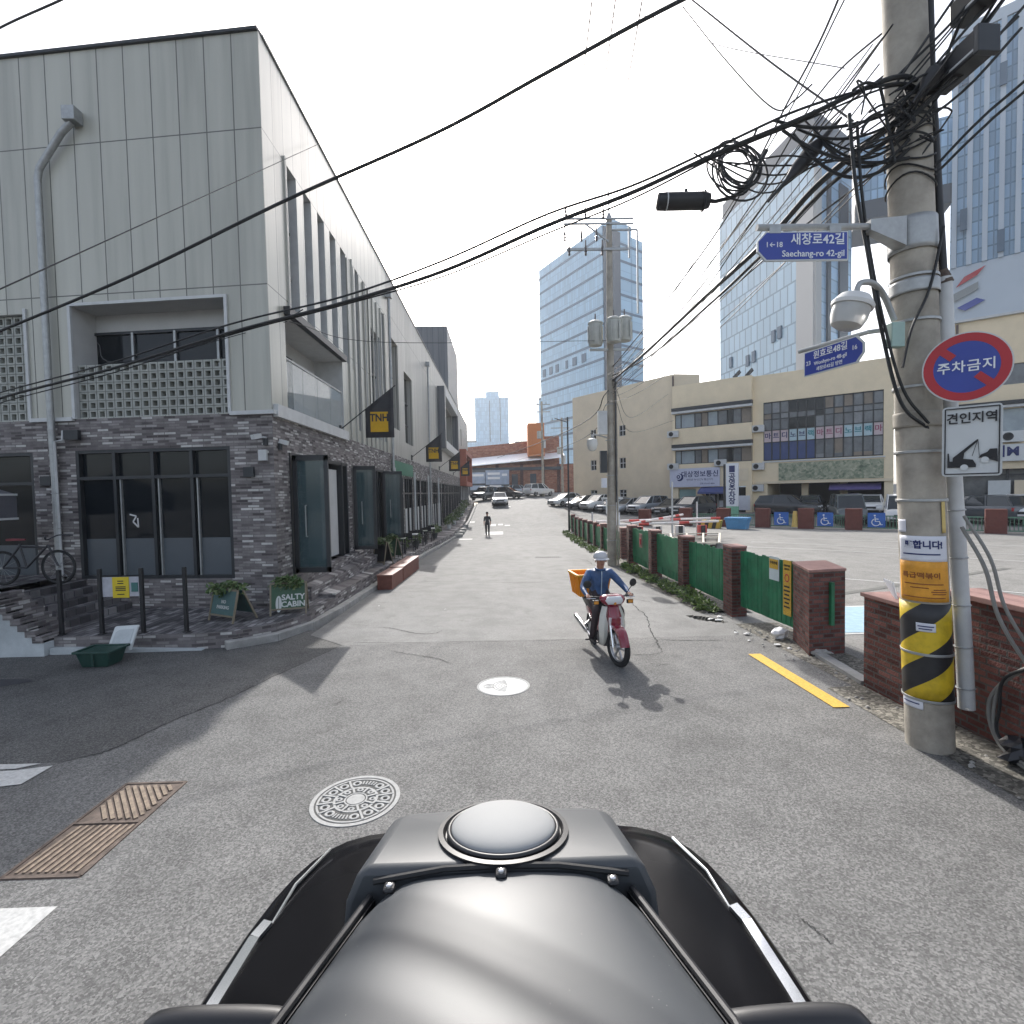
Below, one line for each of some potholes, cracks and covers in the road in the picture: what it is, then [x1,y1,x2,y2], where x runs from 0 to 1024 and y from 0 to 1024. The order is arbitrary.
crack [632,599,670,666]
manhole cover [309,776,400,828]
manhole cover [477,677,530,696]
